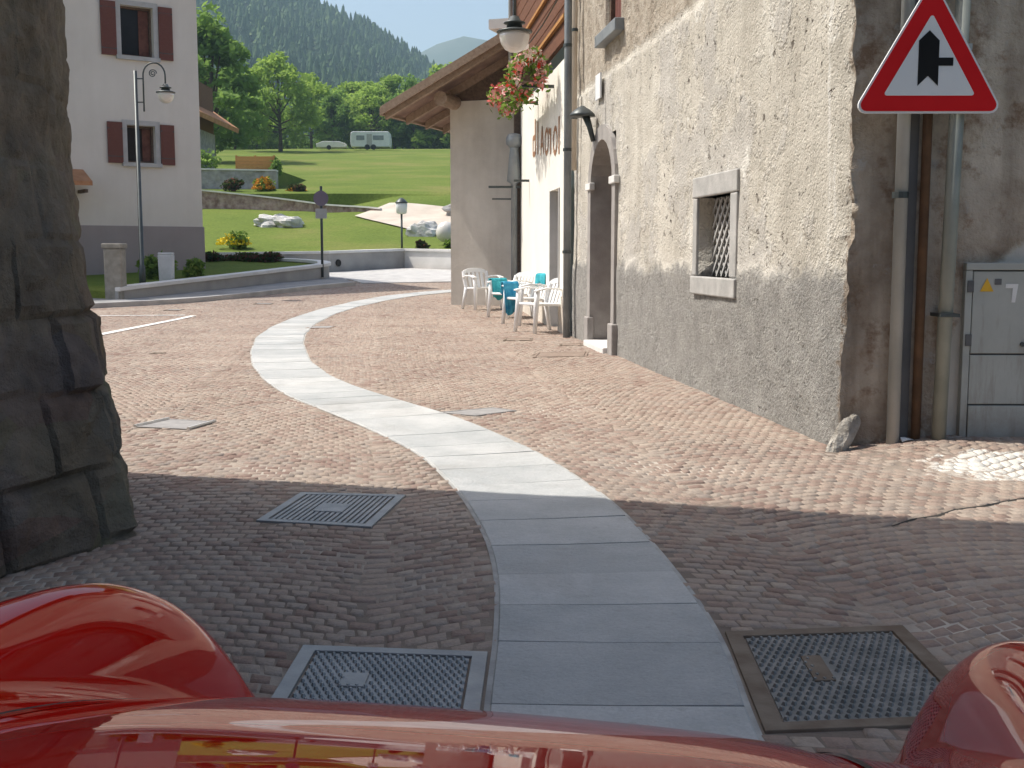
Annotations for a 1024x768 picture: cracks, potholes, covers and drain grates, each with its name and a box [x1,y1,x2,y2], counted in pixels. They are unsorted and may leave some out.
manhole cover [725,625,949,734]
manhole cover [133,417,216,430]
manhole cover [271,645,488,710]
manhole cover [442,407,517,417]
crack [892,498,1024,526]
drain grate [256,492,406,528]
